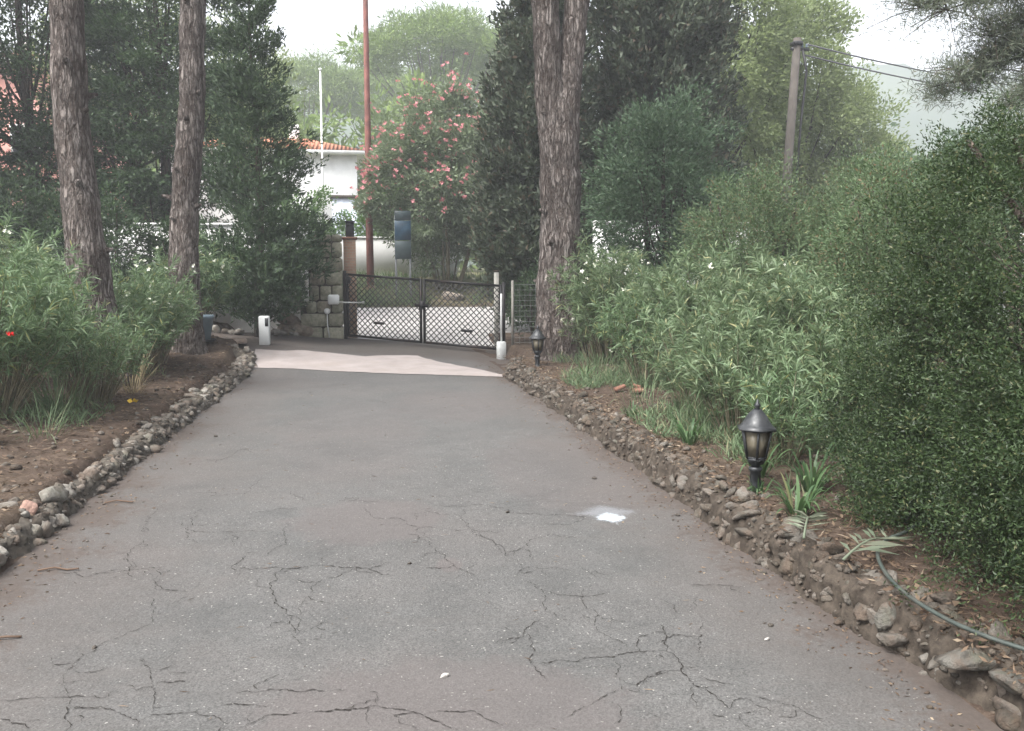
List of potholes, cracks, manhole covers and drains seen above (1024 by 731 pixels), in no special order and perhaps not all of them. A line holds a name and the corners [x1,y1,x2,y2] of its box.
crack [0,598,499,731]
crack [181,493,303,564]
crack [231,557,389,643]
crack [342,496,605,576]
crack [497,579,830,727]
